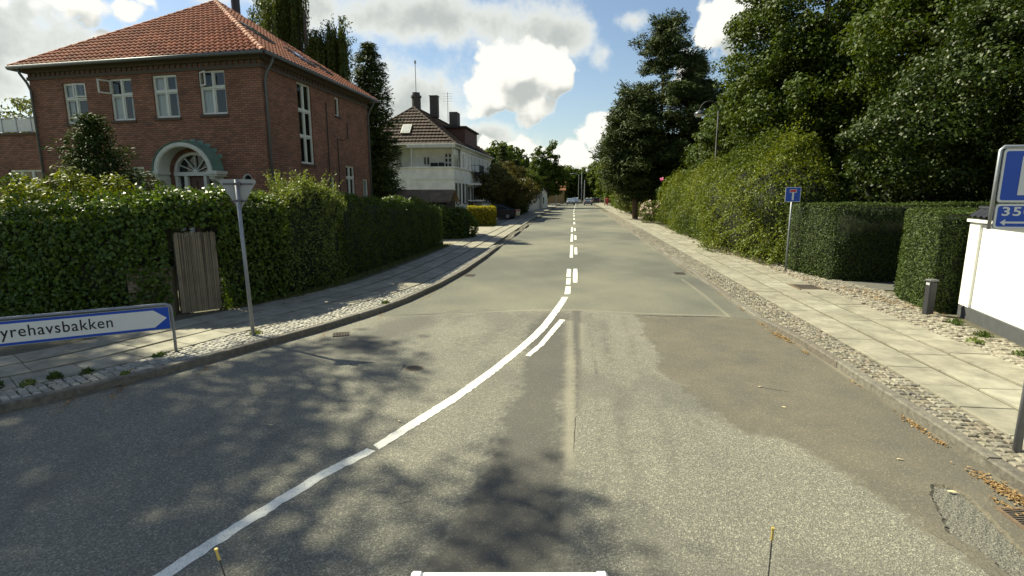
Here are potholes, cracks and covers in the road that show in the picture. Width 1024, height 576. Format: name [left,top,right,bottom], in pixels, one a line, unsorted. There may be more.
drain grate [993,506,1024,530]
pothole [910,476,1024,576]
